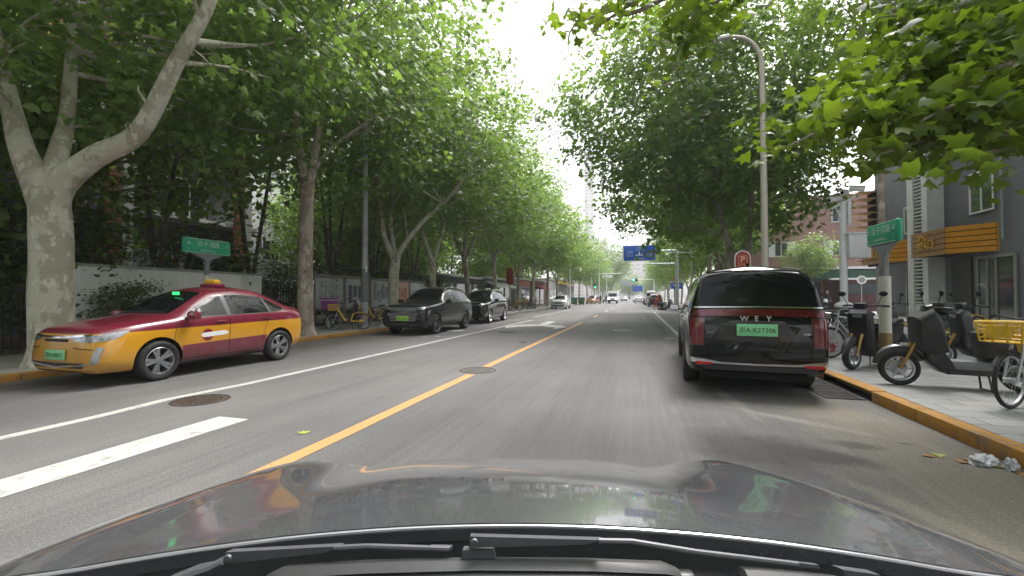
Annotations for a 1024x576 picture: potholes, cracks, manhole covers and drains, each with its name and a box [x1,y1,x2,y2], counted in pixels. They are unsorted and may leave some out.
manhole cover [168,394,231,406]
drain grate [804,372,888,401]
